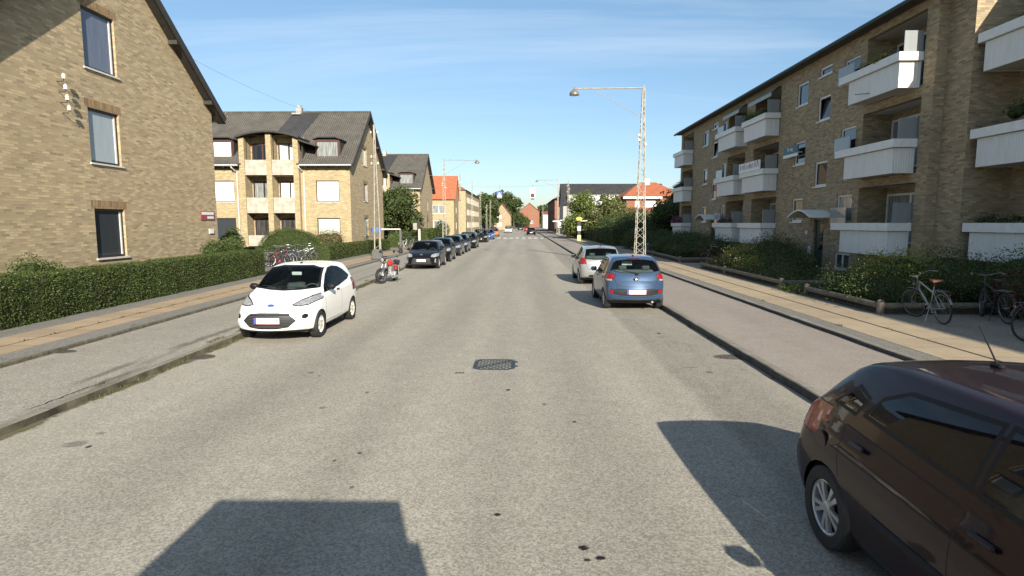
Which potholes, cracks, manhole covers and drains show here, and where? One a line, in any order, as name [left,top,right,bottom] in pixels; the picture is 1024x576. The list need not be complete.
manhole cover [472,359,518,370]
